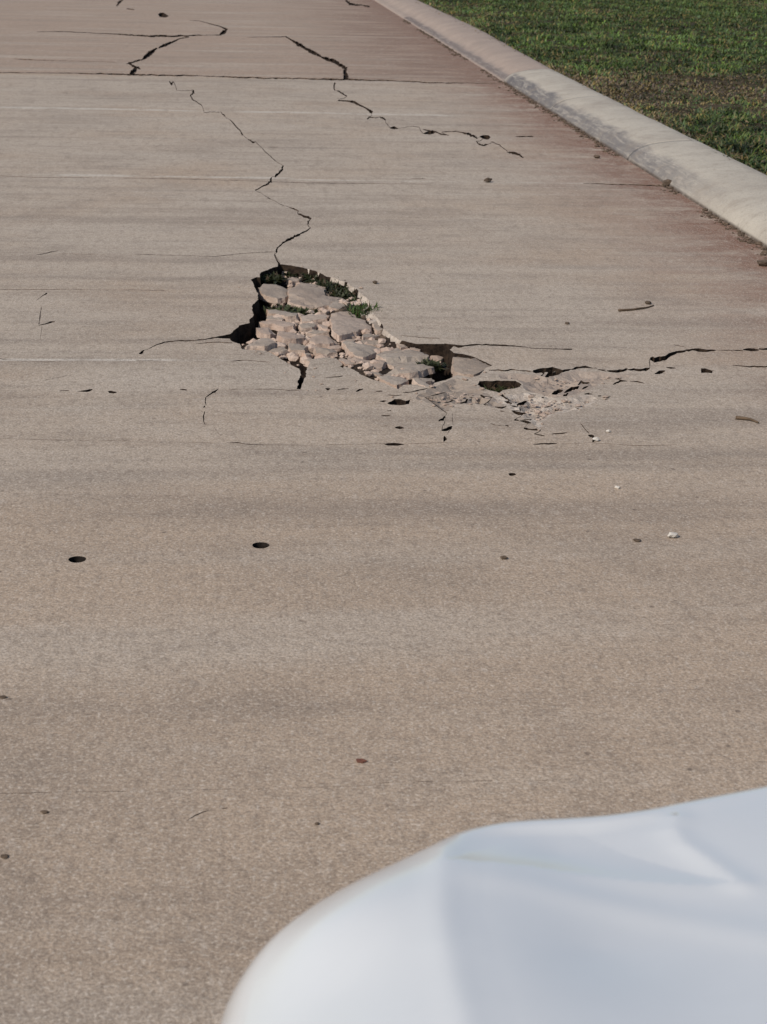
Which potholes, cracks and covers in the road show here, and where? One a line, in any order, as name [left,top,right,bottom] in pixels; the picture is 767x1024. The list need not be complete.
crack [325,335,767,442]
crack [43,376,291,424]
